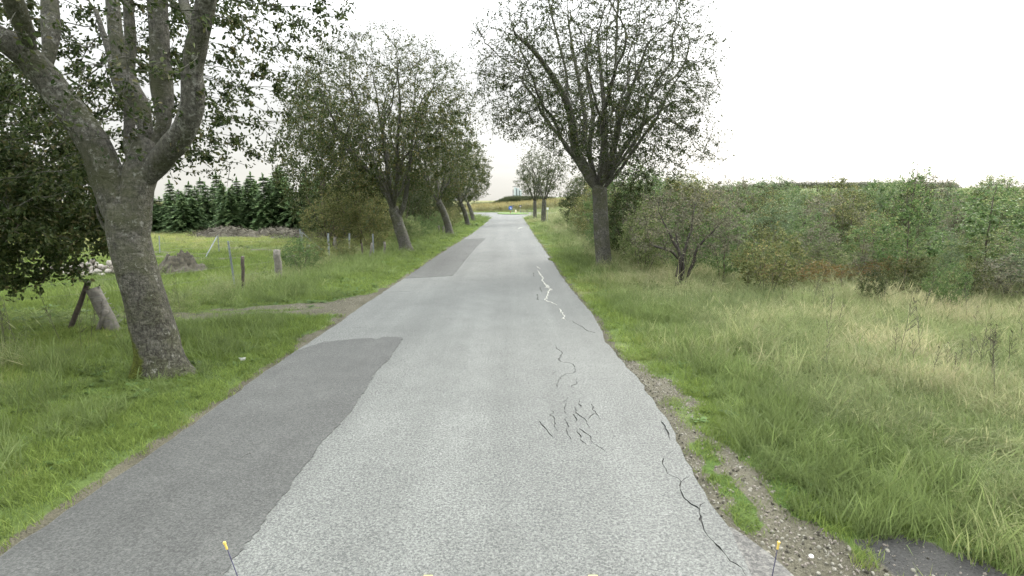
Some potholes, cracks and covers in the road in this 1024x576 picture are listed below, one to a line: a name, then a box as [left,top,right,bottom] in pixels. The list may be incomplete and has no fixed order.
crack [661,422,745,574]
crack [540,346,596,446]
crack [537,267,584,328]
